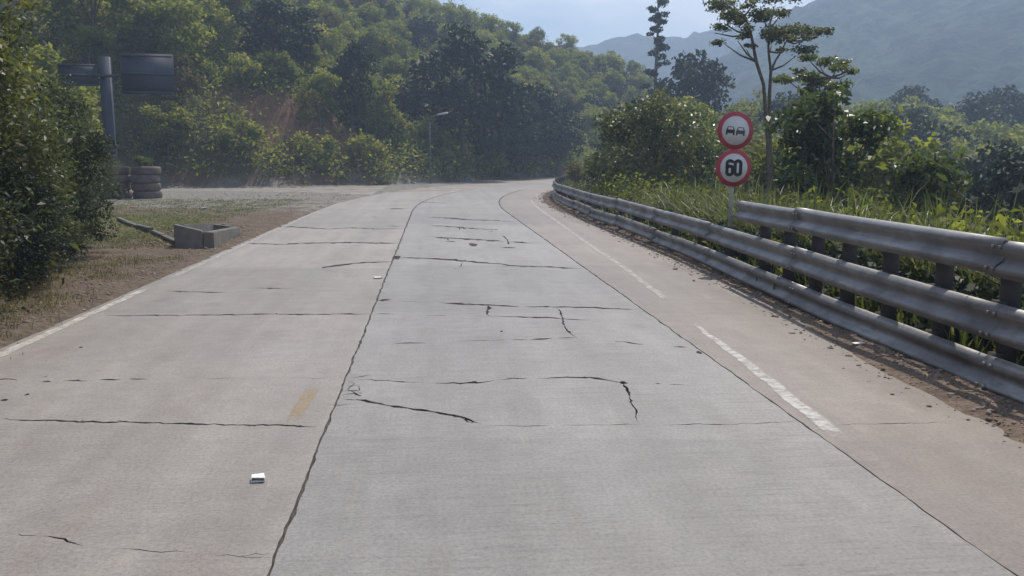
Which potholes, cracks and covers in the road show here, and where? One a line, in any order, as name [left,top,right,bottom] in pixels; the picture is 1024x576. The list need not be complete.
crack [19,534,272,558]
crack [338,375,639,423]
crack [379,299,634,344]
crack [249,202,579,269]
